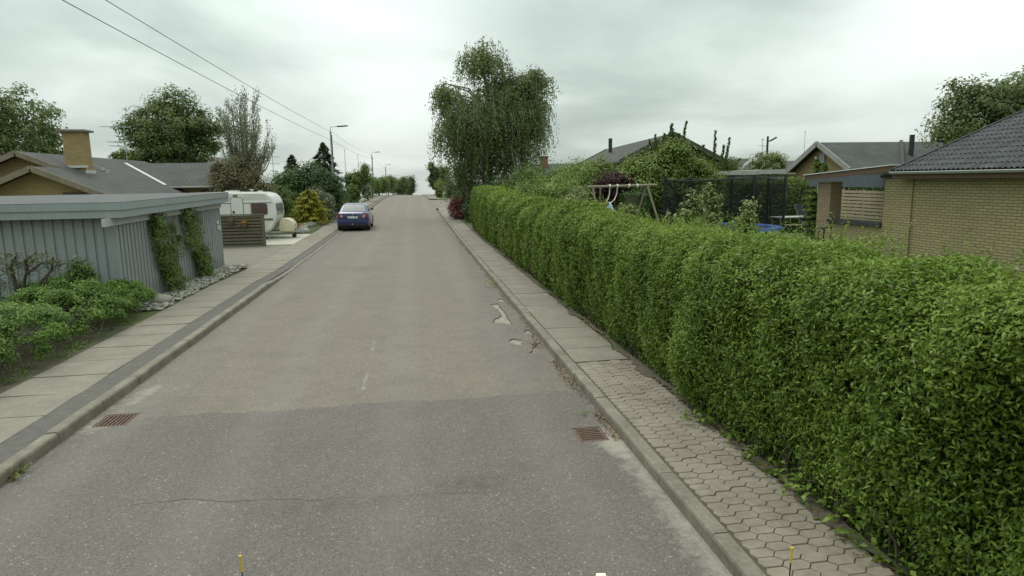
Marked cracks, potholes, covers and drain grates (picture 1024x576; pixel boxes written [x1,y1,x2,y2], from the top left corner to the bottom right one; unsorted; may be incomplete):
drain grate [572,427,609,442]
drain grate [92,413,140,428]
crack [119,489,535,506]
pothole [491,303,513,324]
